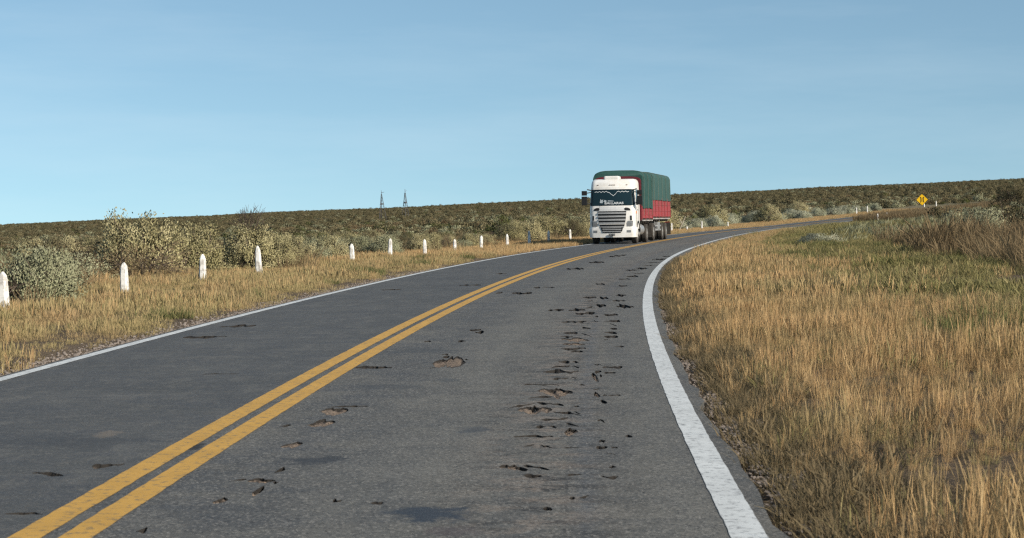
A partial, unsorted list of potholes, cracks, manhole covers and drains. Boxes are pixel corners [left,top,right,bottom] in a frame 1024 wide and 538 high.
pothole [560,332,592,351]
pothole [511,402,579,415]
pothole [319,405,367,416]
pothole [525,384,573,399]
pothole [309,419,335,427]
pothole [432,356,468,368]
pothole [499,465,549,478]
